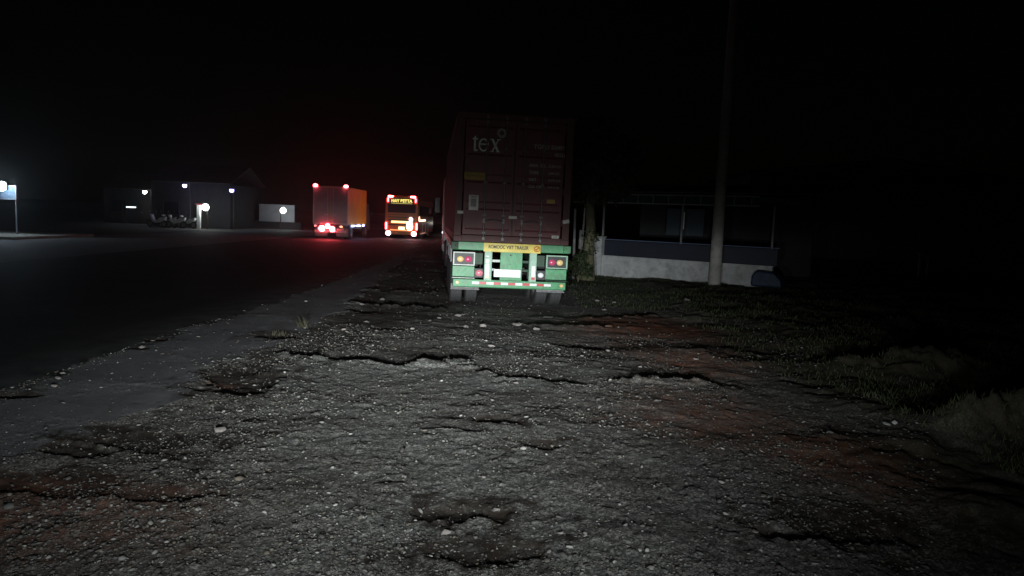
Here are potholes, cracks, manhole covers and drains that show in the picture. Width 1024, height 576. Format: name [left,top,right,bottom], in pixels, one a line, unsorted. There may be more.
pothole [33,426,236,460]
pothole [408,496,528,527]
pothole [0,467,229,503]
pothole [369,534,547,569]
pothole [167,350,303,398]
